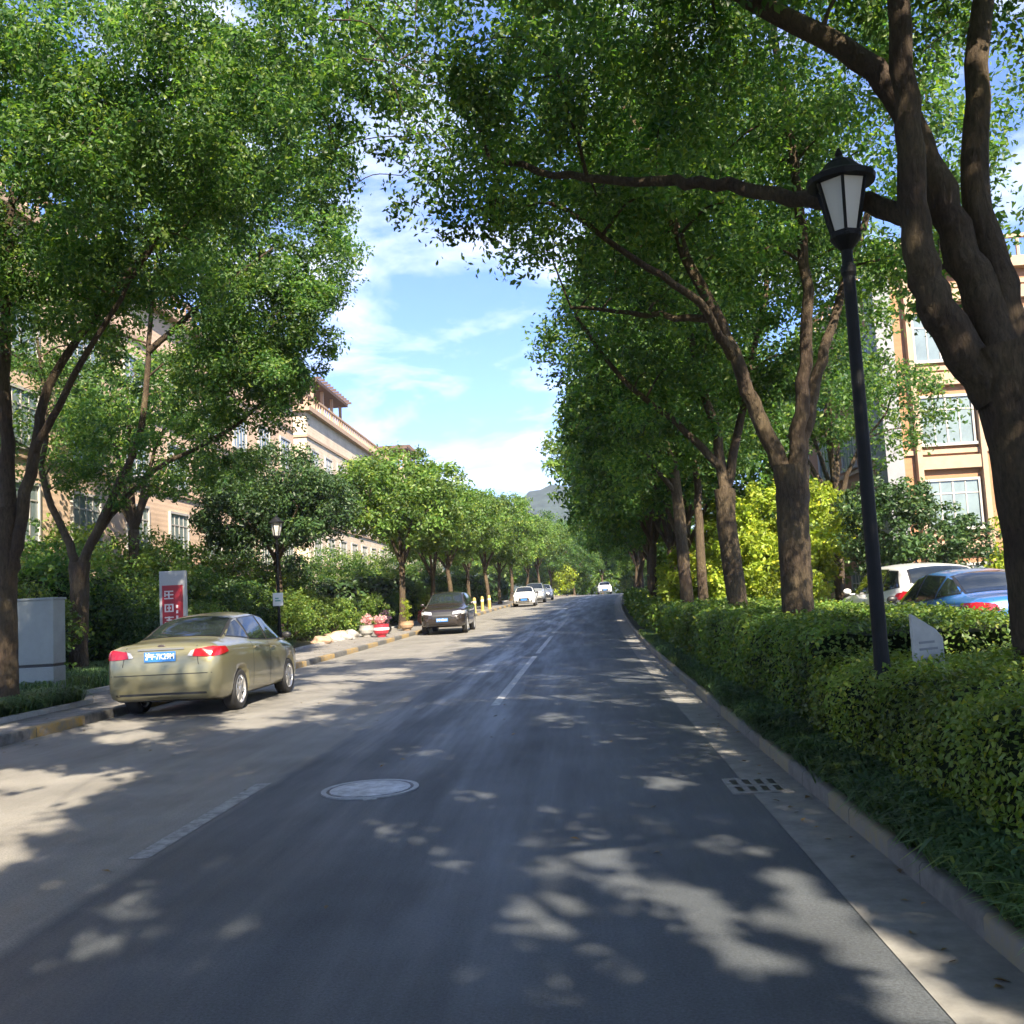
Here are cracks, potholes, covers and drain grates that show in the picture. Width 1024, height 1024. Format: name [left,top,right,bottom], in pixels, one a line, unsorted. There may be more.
drain grate [722,776,794,795]
manhole cover [321,779,419,801]
